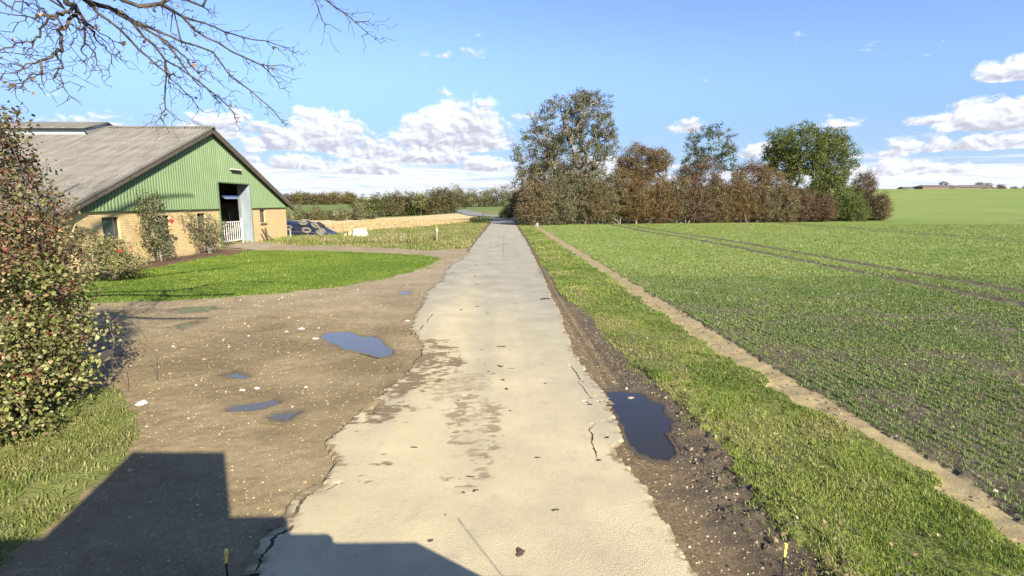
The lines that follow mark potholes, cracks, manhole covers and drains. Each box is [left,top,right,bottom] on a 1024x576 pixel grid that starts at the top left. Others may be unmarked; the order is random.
pothole [315,330,398,359]
crack [242,483,345,575]
crack [566,365,619,459]
pothole [255,405,313,425]
pothole [602,387,686,465]
pothole [210,368,259,380]
pothole [213,395,291,414]
